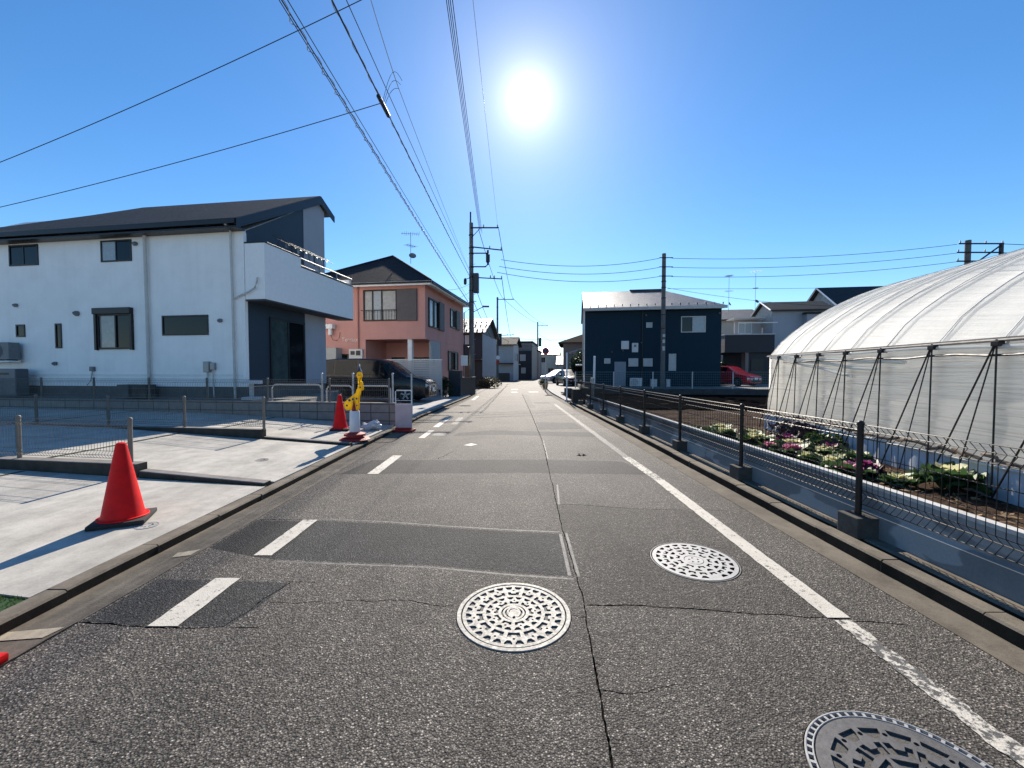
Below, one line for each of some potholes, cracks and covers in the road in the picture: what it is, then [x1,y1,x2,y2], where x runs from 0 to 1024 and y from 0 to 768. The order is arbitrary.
manhole cover [650,542,742,582]
manhole cover [457,583,571,653]
manhole cover [804,711,993,768]
